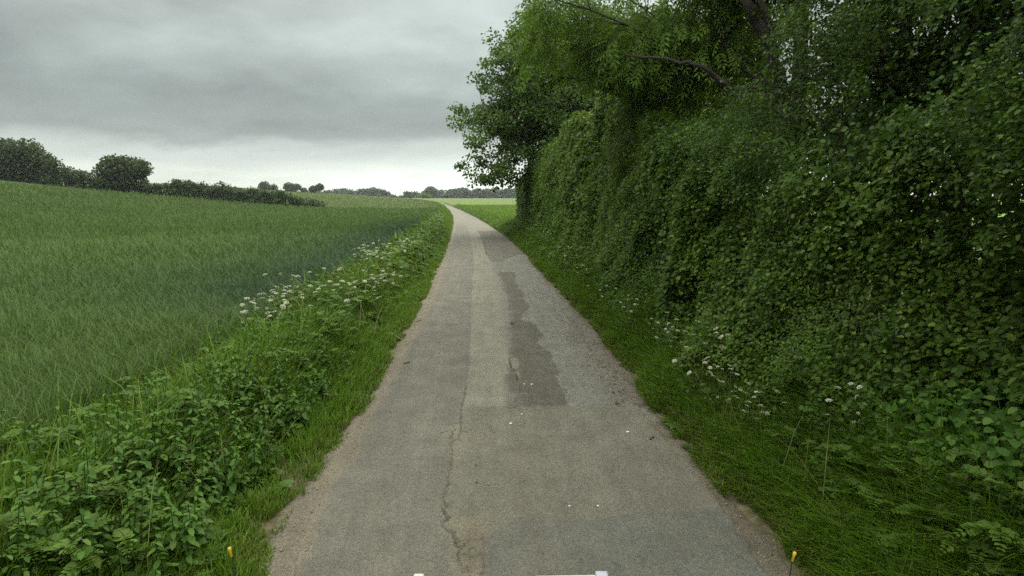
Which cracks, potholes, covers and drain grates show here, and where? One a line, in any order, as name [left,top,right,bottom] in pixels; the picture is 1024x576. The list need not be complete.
crack [440,387,488,575]
